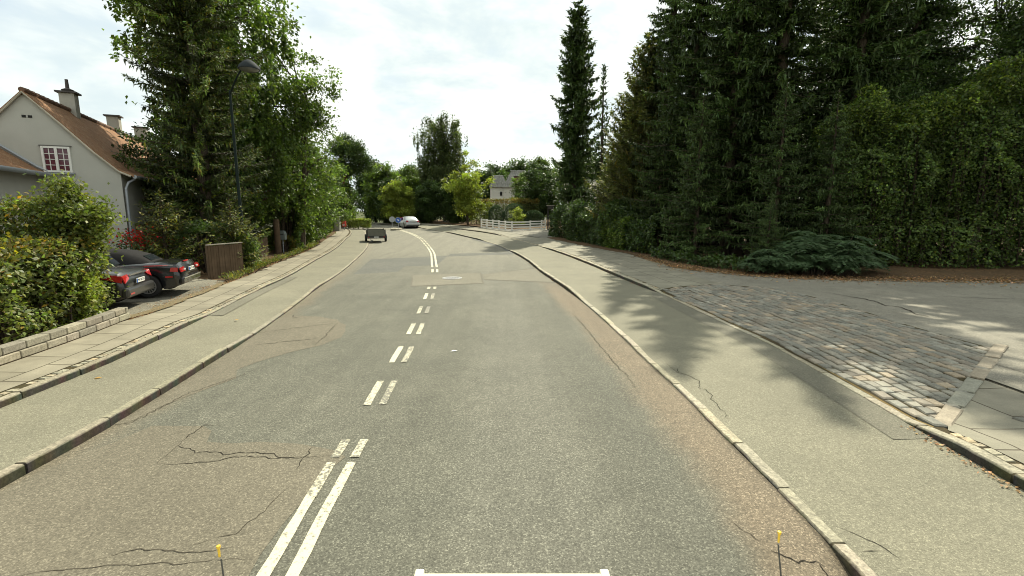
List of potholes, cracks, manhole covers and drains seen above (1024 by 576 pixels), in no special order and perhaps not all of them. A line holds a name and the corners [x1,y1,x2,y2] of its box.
crack [258,315,334,345]
crack [157,424,316,468]
crack [733,522,828,576]
crack [19,490,285,576]
